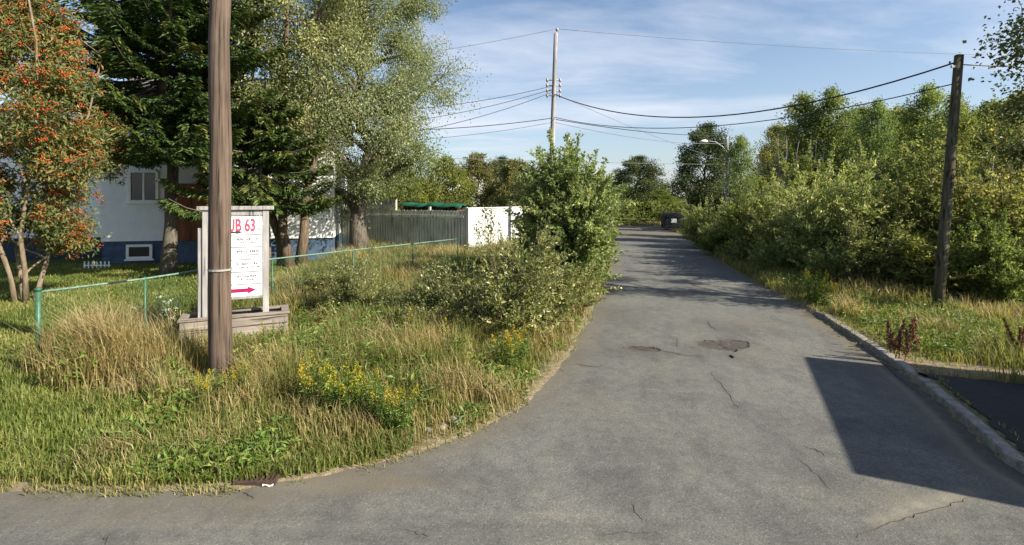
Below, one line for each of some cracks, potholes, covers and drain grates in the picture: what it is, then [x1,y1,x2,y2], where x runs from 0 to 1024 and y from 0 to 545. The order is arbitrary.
drain grate [233,465,285,486]
